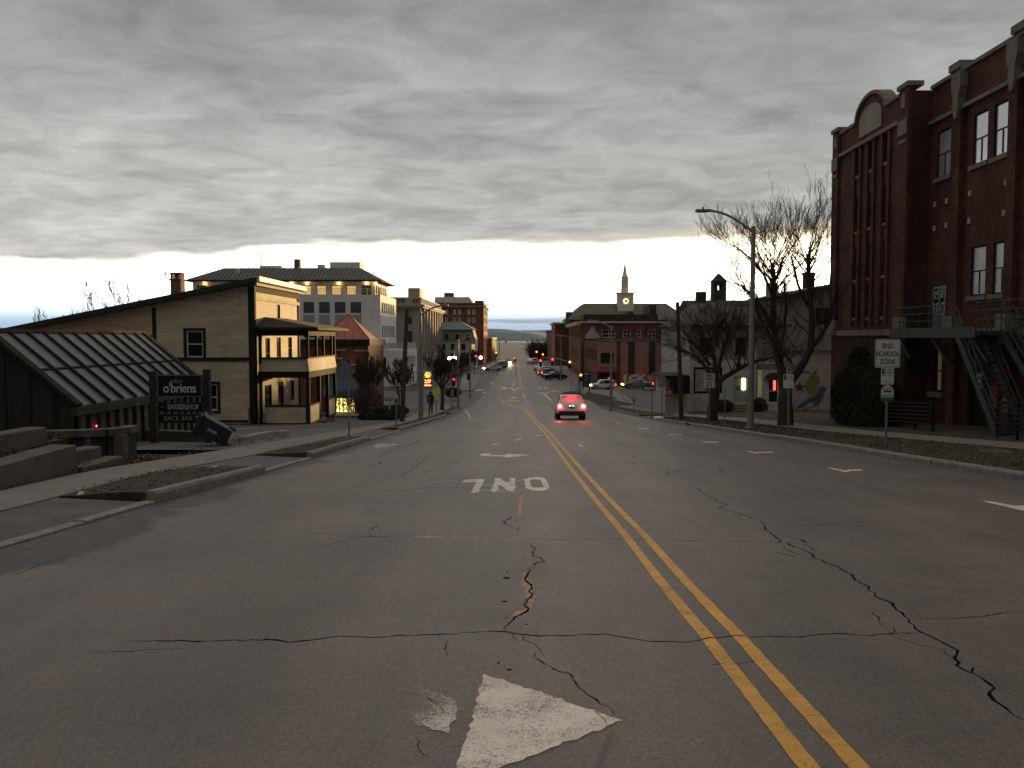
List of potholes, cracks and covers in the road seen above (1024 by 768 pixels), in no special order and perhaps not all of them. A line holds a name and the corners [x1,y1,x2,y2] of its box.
crack [87,439,1024,722]
